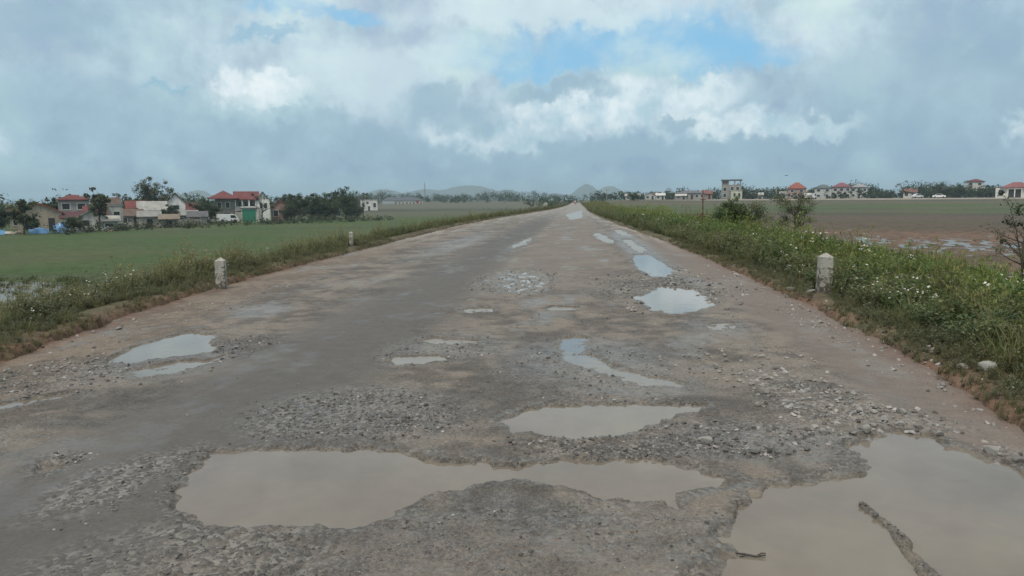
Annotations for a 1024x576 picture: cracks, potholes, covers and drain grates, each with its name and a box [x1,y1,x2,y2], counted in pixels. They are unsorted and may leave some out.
pothole [588,232,623,244]
pothole [476,395,725,446]
pothole [97,349,248,383]
pothole [619,283,726,316]
pothole [443,304,507,316]
pothole [624,253,685,278]
pothole [472,267,561,296]
pothole [531,333,707,395]
pothole [365,350,467,369]
pothole [139,436,768,548]
pothole [645,419,1024,576]
pothole [82,327,238,370]
